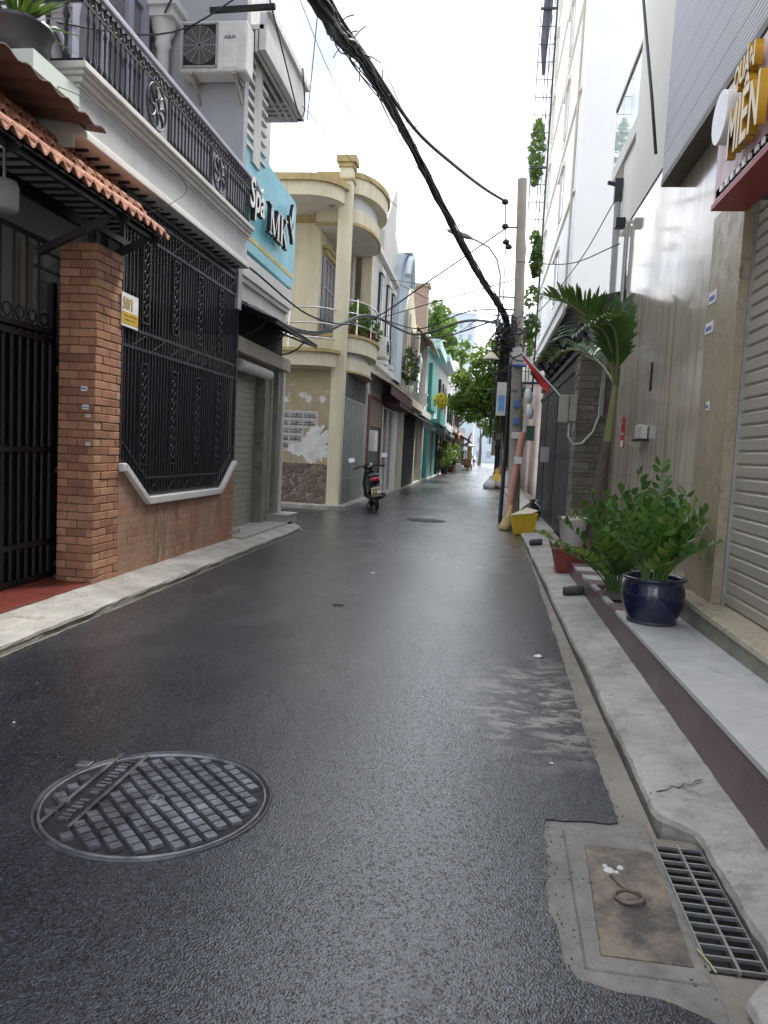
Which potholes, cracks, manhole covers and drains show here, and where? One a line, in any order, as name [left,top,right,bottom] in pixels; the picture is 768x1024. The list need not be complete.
manhole cover [29,751,272,862]
crack [650,779,703,796]
manhole cover [543,821,732,1024]
drain grate [653,843,768,981]
